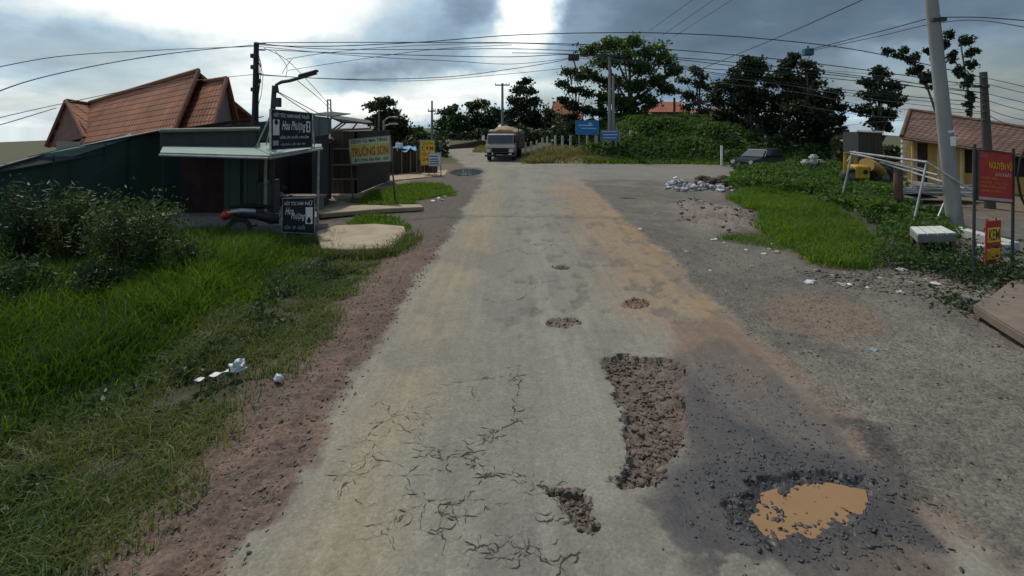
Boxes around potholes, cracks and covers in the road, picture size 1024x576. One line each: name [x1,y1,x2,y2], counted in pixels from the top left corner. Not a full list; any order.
crack [328,365,586,576]
pothole [601,353,692,490]
pothole [662,437,985,576]
pothole [545,317,584,329]
pothole [623,297,653,309]
pothole [541,485,604,536]
